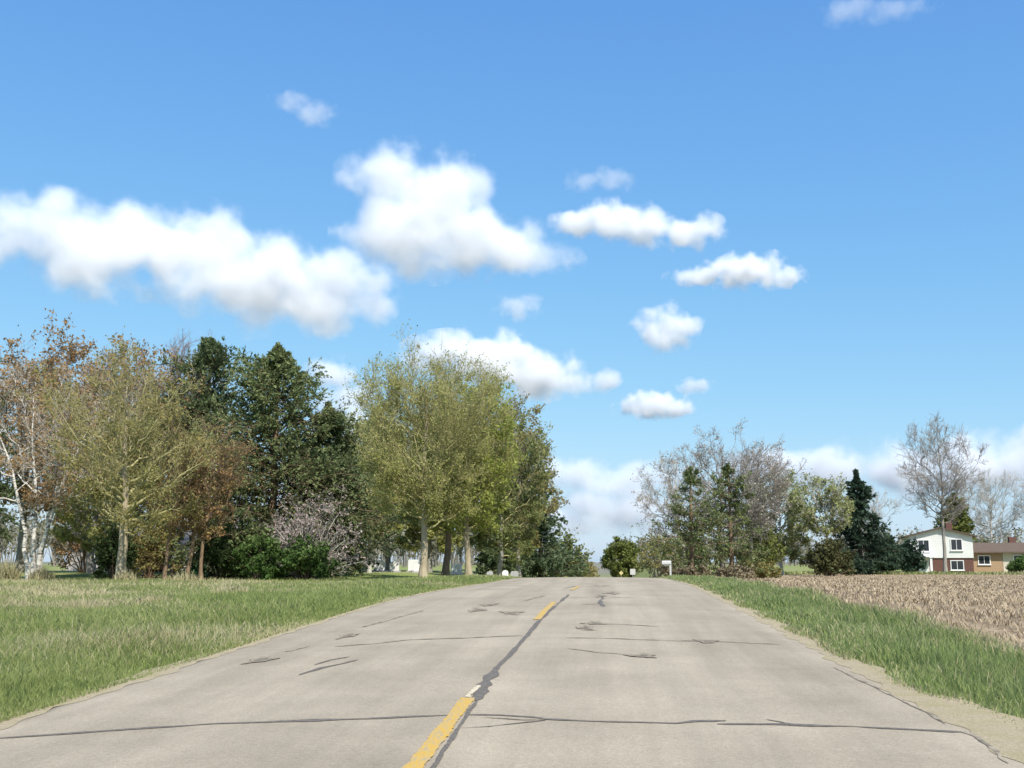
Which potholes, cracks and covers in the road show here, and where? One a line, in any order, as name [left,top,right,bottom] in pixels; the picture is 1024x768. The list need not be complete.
crack [285,586,769,675]
crack [834,667,1008,763]
